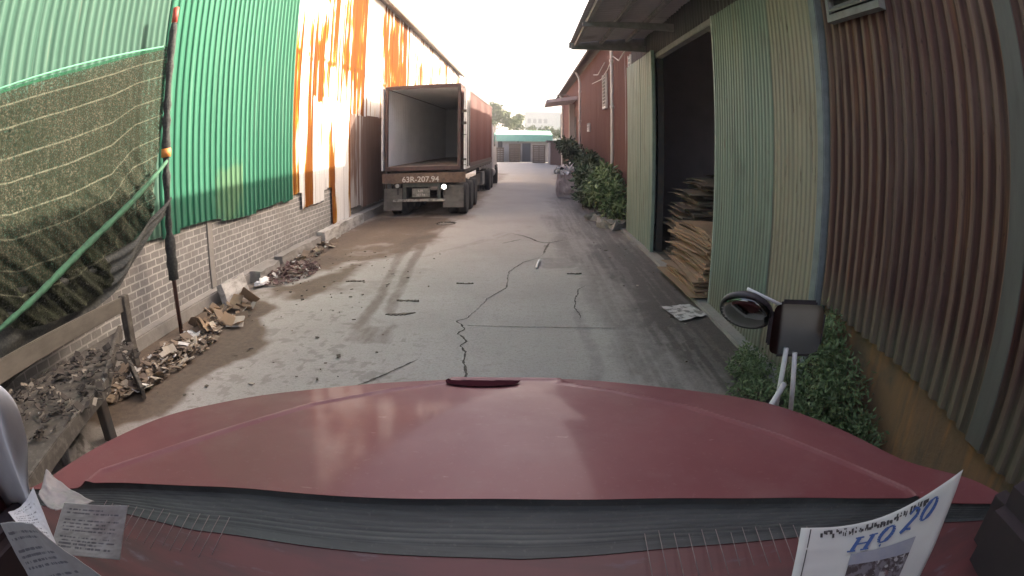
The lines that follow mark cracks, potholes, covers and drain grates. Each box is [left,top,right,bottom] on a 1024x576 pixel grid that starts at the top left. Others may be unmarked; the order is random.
crack [454,233,600,377]
